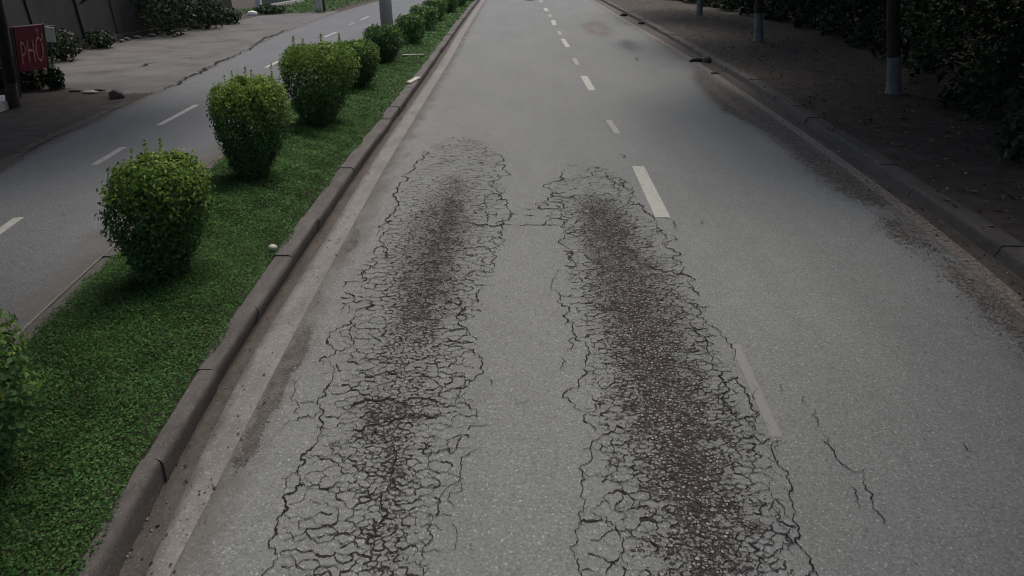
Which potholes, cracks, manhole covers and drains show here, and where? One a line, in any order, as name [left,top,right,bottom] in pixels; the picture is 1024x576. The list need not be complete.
crack [261,137,818,576]
crack [801,395,886,531]
